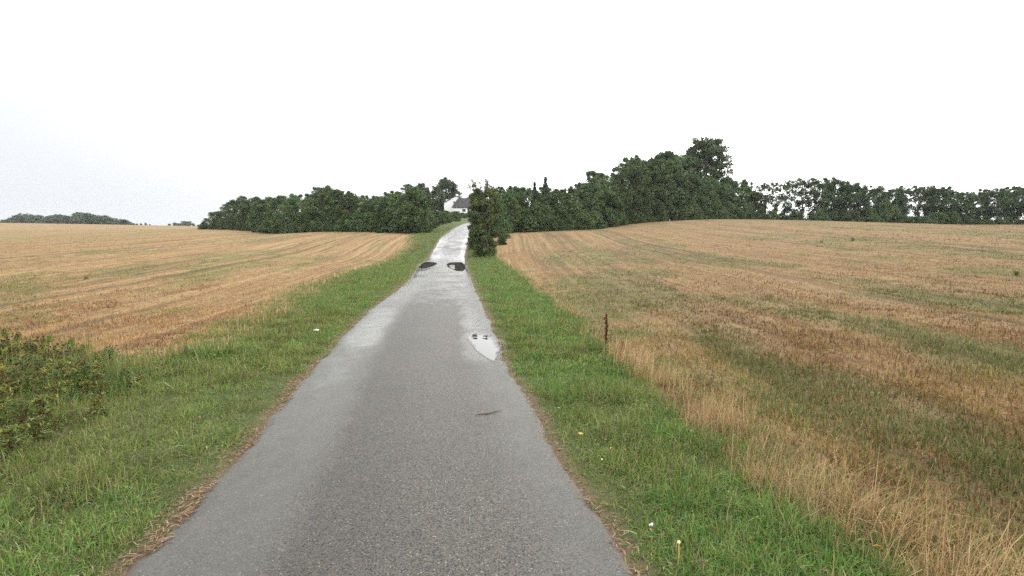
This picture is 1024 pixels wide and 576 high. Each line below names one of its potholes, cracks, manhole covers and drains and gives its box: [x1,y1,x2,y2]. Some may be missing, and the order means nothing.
pothole [446,262,467,271]
